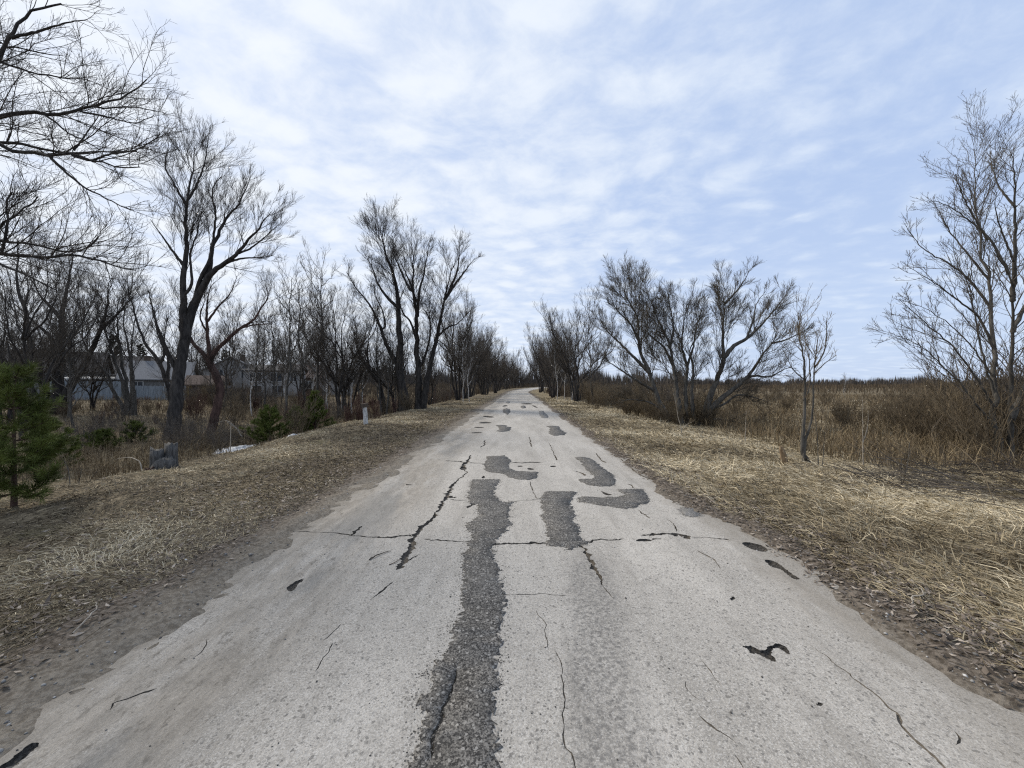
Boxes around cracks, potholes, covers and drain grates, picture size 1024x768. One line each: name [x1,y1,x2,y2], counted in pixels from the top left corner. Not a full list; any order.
pothole [742,542,767,552]
crack [817,650,961,768]
pothole [765,560,799,580]
crack [298,437,621,768]
pothole [743,643,790,662]
pothole [0,742,39,768]
